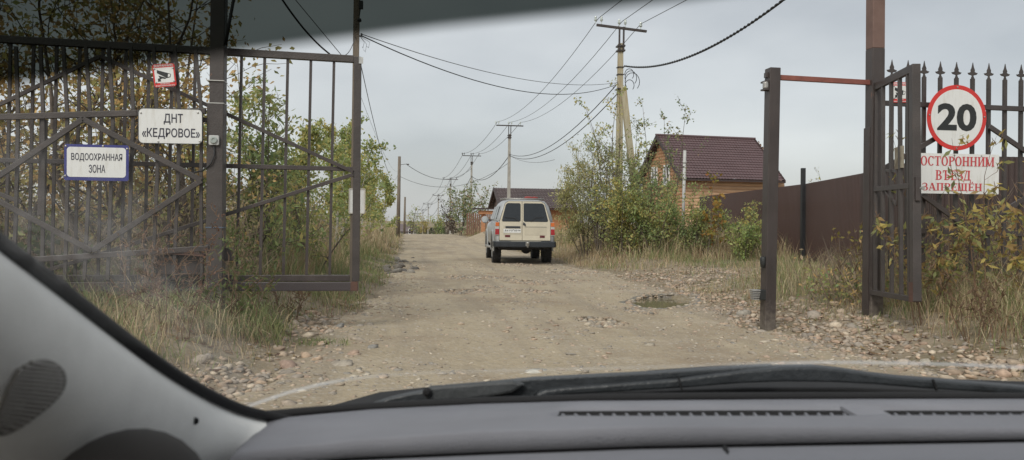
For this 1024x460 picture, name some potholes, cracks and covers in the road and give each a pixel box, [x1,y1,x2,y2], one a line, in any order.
pothole [618,292,702,309]
